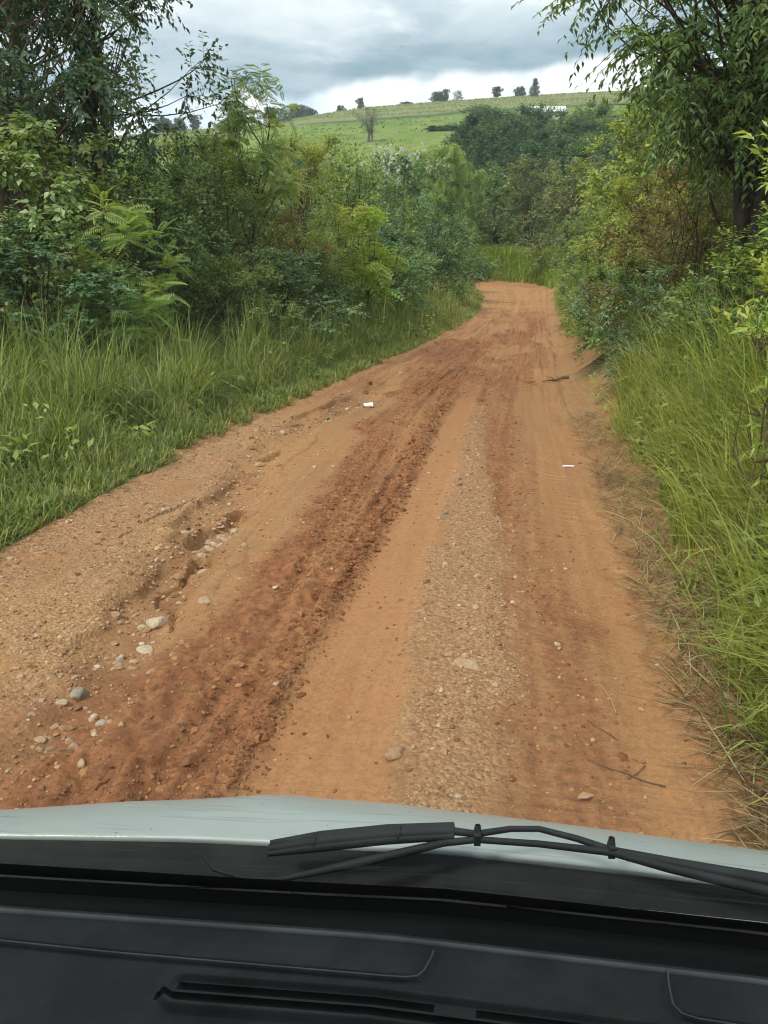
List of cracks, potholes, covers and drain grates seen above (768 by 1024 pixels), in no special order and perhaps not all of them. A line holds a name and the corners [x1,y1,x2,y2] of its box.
pothole [257,449,285,464]
pothole [183,556,218,583]
pothole [180,511,259,551]
